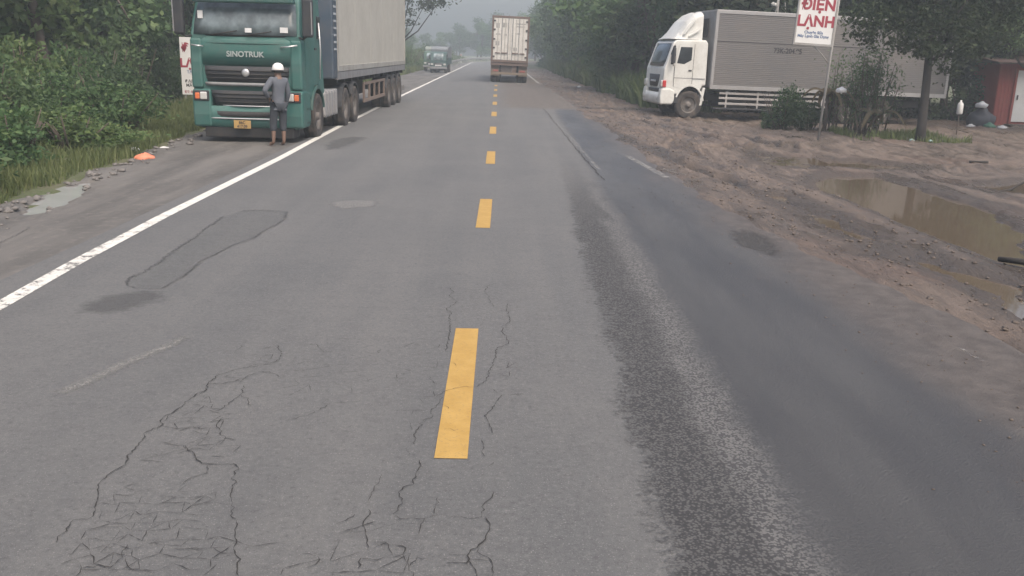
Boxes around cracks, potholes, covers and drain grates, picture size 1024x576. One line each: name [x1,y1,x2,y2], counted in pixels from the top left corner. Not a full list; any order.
crack [57,344,371,576]
crack [480,283,514,455]
crack [396,288,468,442]
crack [281,460,494,576]
